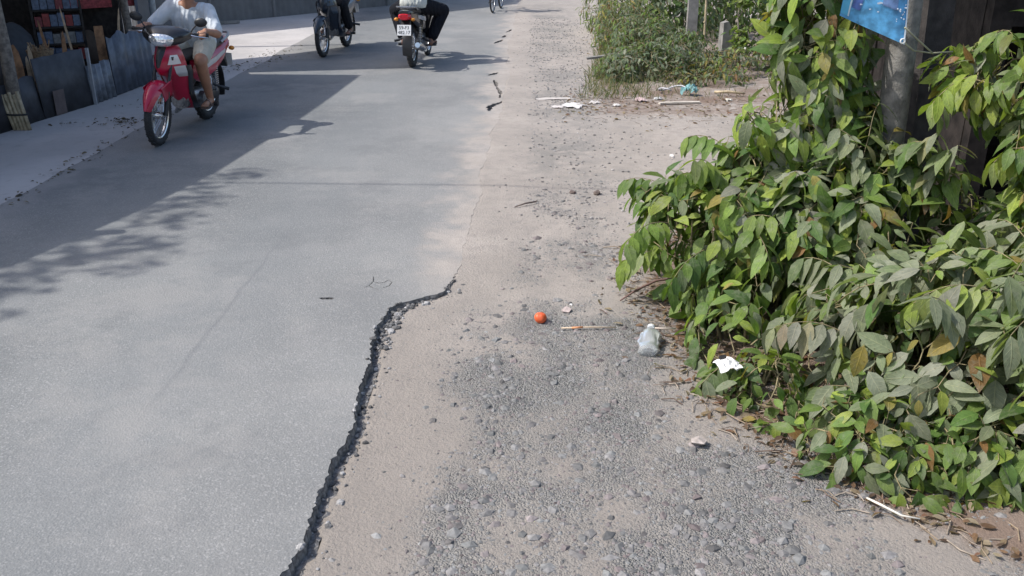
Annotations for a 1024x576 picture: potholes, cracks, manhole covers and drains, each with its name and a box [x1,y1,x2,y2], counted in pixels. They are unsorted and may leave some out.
crack [486,73,502,111]
crack [281,277,462,576]
